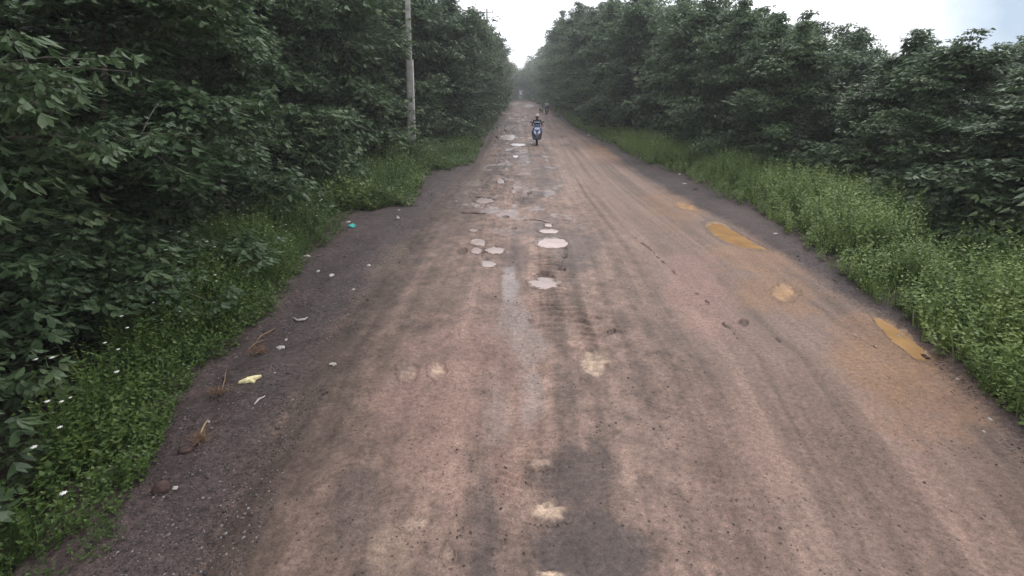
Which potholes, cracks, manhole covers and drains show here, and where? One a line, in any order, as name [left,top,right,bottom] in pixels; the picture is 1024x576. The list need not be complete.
pothole [532,235,571,251]
pothole [524,274,564,292]
pothole [495,133,520,142]
pothole [866,310,940,367]
pothole [700,219,774,254]
pothole [483,244,507,255]
pothole [671,199,705,214]
pothole [468,237,489,247]
pothole [472,197,496,205]
pothole [763,280,802,304]
pothole [478,259,498,268]
